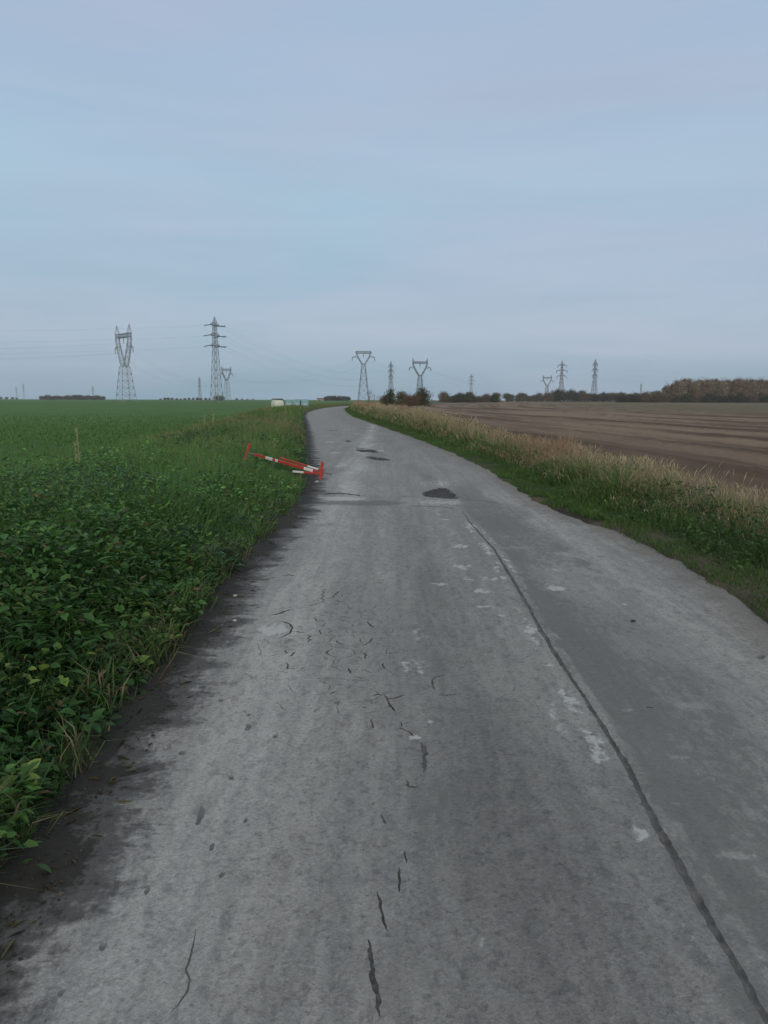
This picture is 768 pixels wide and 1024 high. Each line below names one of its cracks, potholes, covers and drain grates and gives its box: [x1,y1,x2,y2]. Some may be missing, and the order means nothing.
crack [367,851,407,1016]
pothole [422,487,460,499]
crack [243,572,428,788]
crack [170,930,196,1013]
